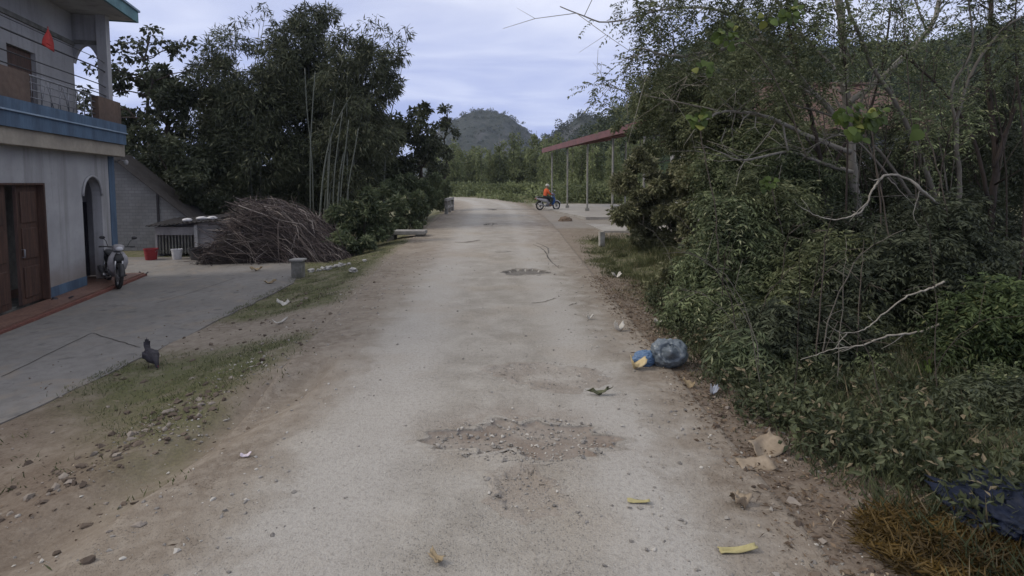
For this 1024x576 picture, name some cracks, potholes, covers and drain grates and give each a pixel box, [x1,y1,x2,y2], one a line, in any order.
pothole [496,268,556,277]
crack [533,243,559,268]
pothole [404,415,639,467]
